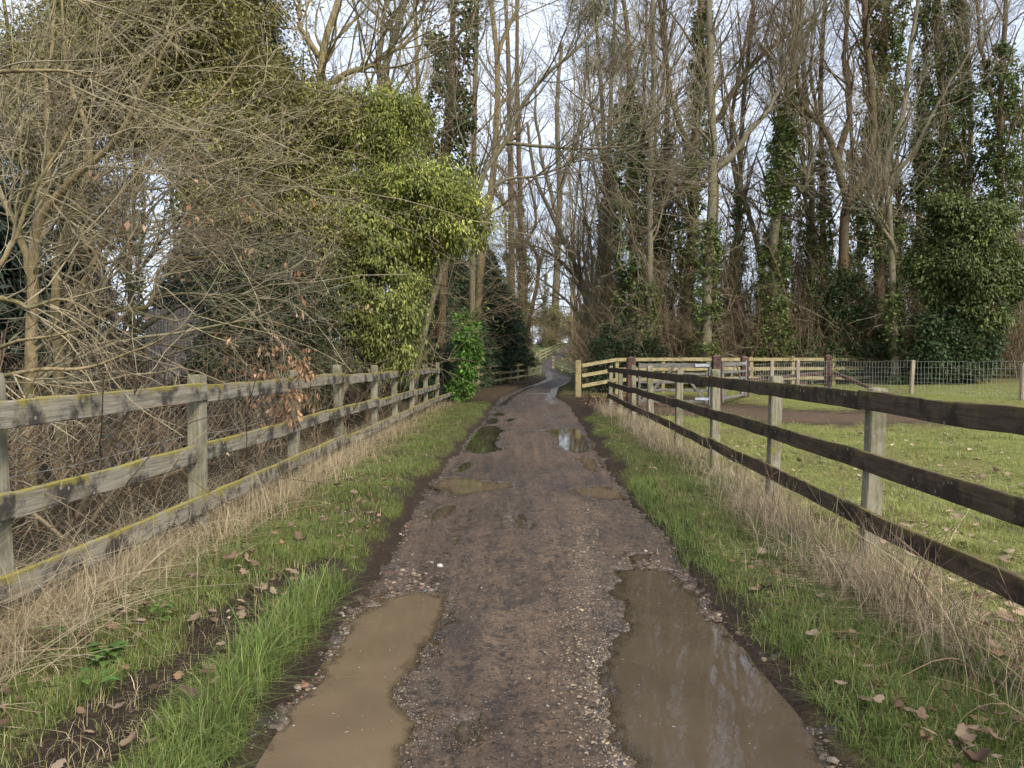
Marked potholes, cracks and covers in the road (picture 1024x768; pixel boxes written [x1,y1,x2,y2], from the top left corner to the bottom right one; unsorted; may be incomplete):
pothole [579,563,841,768]
pothole [543,427,594,453]
pothole [622,551,662,565]
pothole [450,459,476,474]
pothole [427,475,525,497]
pothole [564,484,630,501]
pothole [462,425,506,454]
pothole [249,590,457,768]
pothole [497,510,543,530]
pothole [421,502,465,521]
pothole [573,456,605,472]
